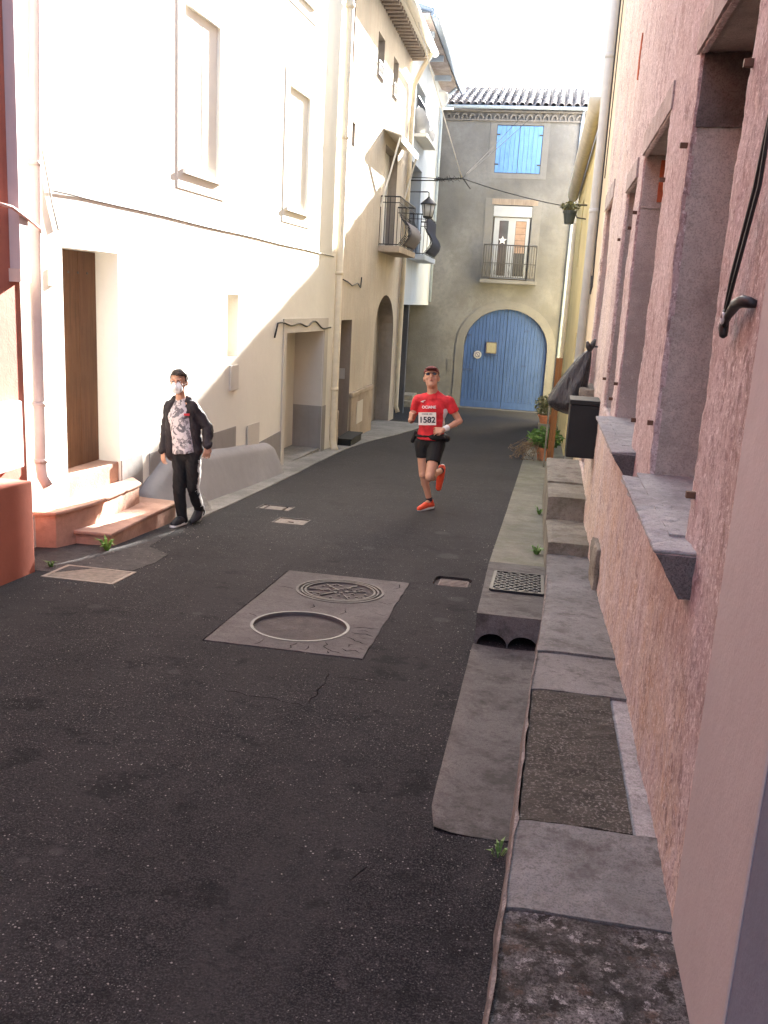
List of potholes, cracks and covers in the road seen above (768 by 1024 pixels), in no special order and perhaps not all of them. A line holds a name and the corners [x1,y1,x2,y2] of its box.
utility cover [434,579,471,587]
manhole cover [296,579,384,603]
crack [225,673,390,705]
crack [248,585,400,653]
utility cover [271,517,311,526]
manhole cover [250,611,350,642]
